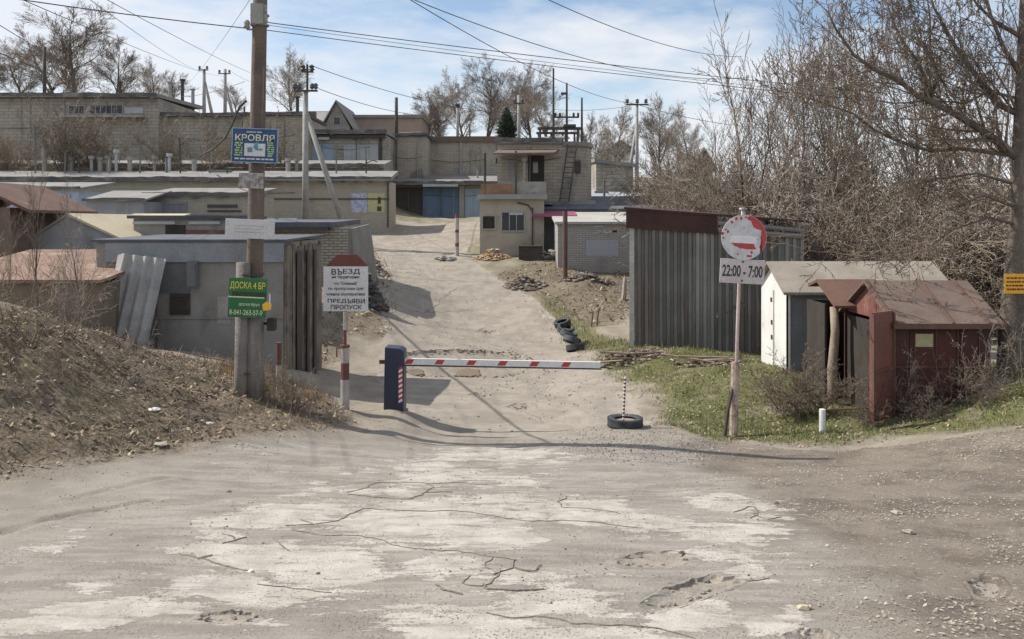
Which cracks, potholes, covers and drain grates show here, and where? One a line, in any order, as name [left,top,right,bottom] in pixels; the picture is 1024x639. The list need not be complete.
pothole [630,572,750,616]
crack [486,612,695,639]
crack [734,506,779,520]
pothole [778,626,840,639]
pothole [186,608,267,626]
crack [277,482,637,595]
pothole [605,549,700,570]
pothole [962,572,1014,603]
